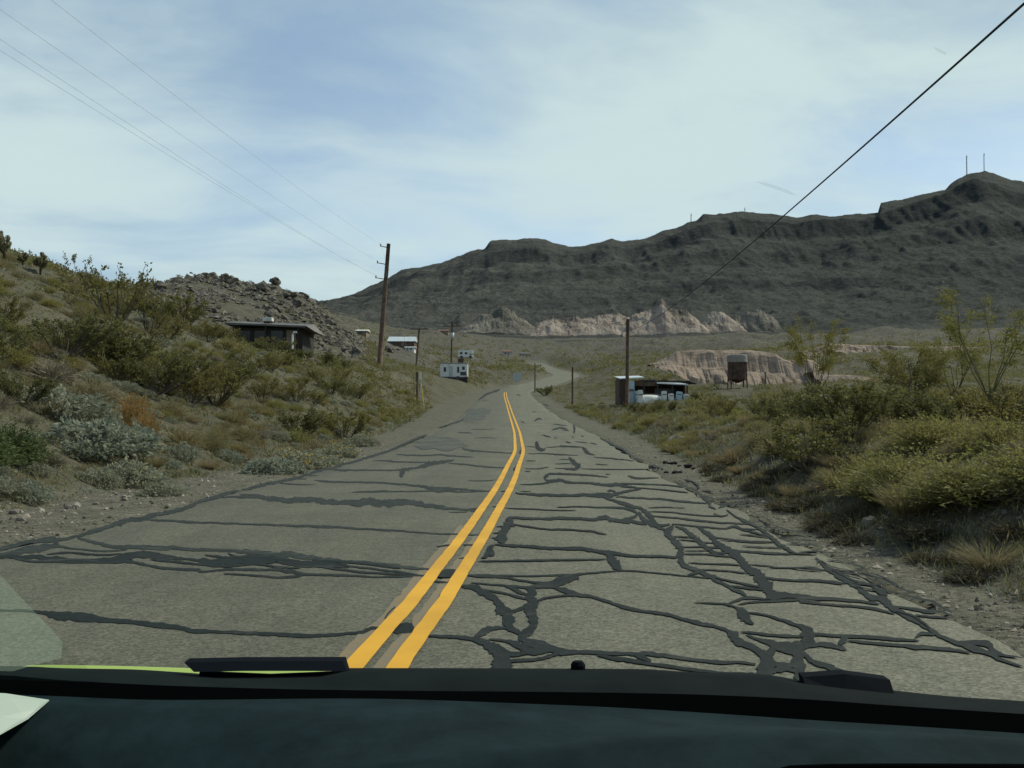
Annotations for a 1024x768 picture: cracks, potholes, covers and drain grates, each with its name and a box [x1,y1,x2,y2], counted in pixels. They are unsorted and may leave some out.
crack [0,389,1023,680]
